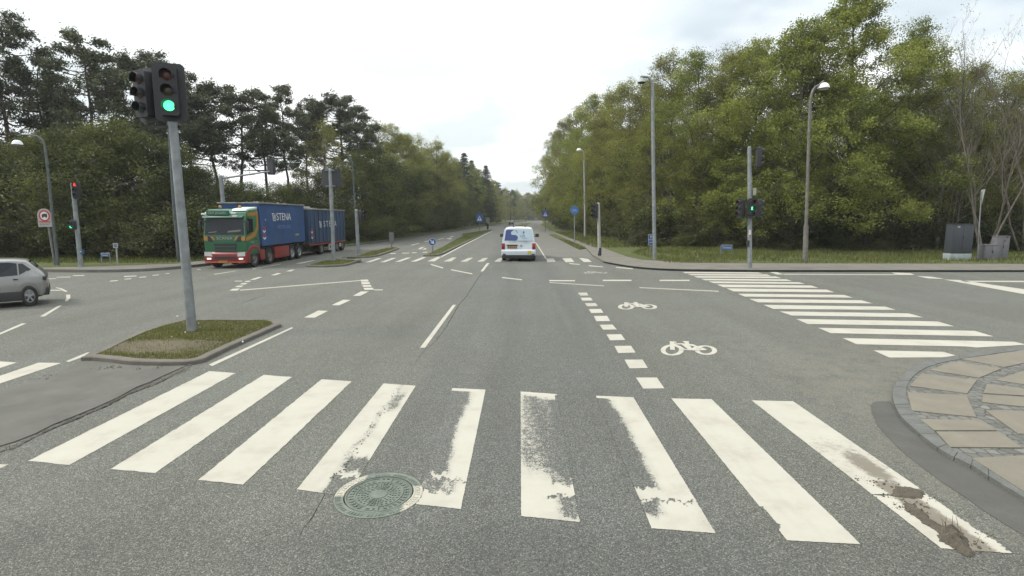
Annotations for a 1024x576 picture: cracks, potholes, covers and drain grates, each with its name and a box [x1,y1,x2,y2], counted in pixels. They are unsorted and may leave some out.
manhole cover [333,473,423,519]
crack [300,280,477,535]
